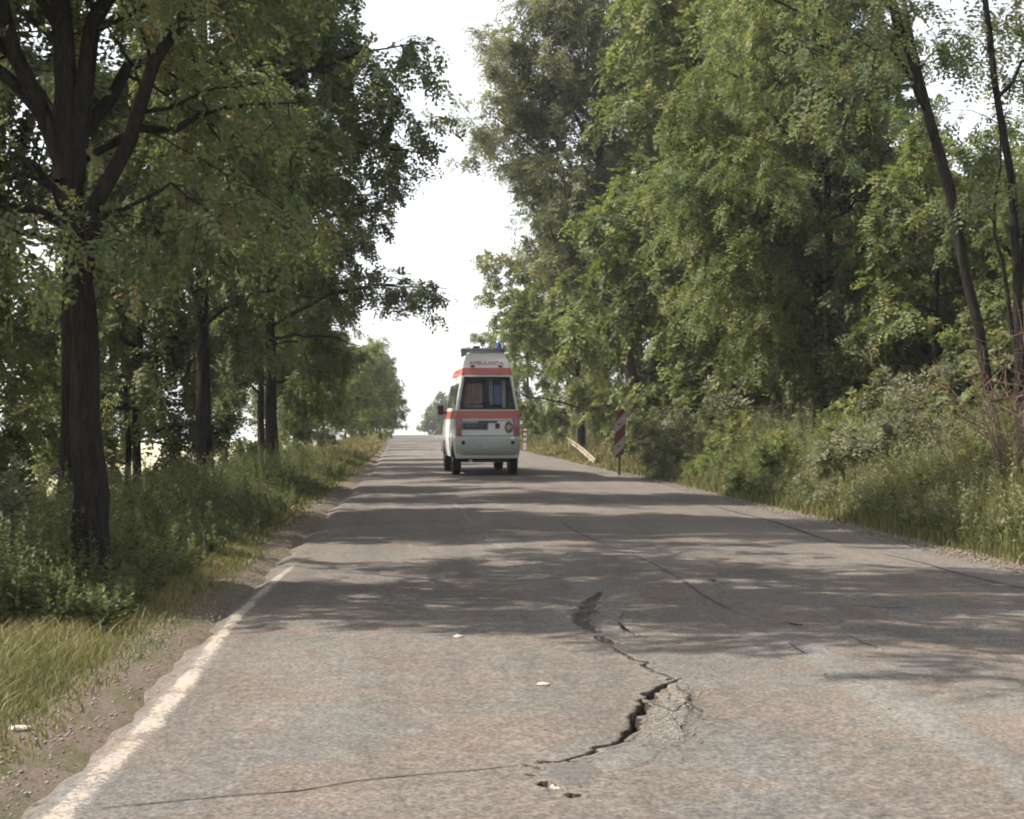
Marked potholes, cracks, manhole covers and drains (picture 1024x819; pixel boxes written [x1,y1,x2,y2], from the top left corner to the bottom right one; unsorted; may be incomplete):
pothole [557,791,591,801]
crack [102,591,709,809]
pothole [529,779,568,791]
